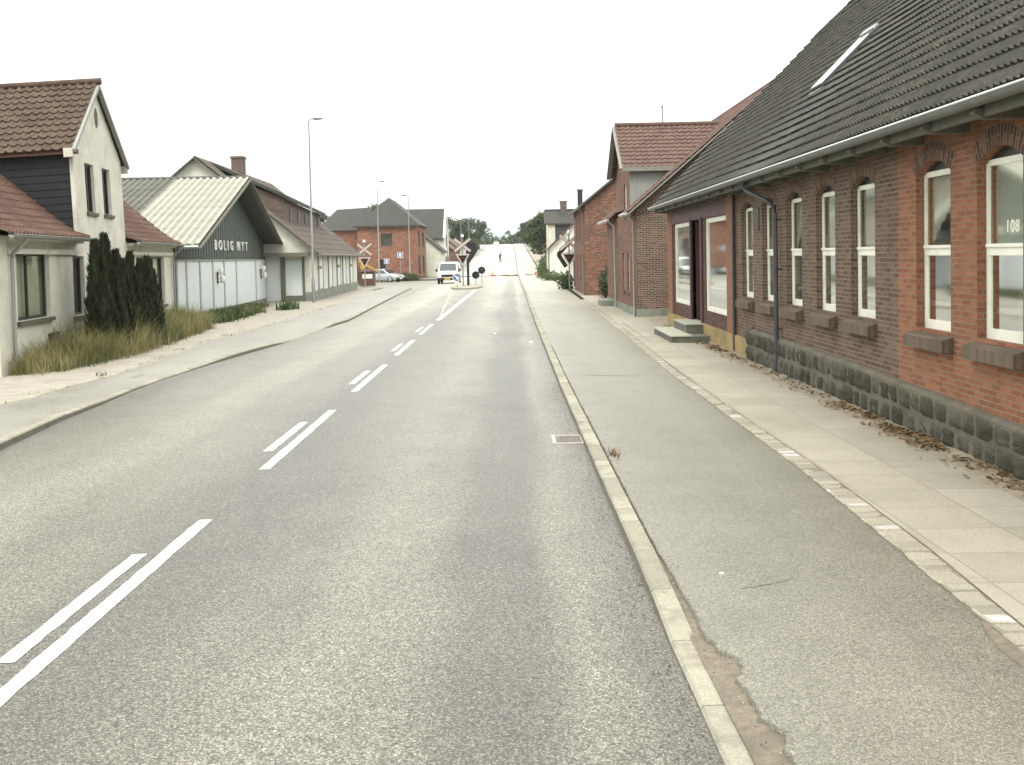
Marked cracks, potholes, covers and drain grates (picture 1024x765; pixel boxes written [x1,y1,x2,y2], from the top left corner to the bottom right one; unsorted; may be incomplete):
drain grate [551,435,584,444]
